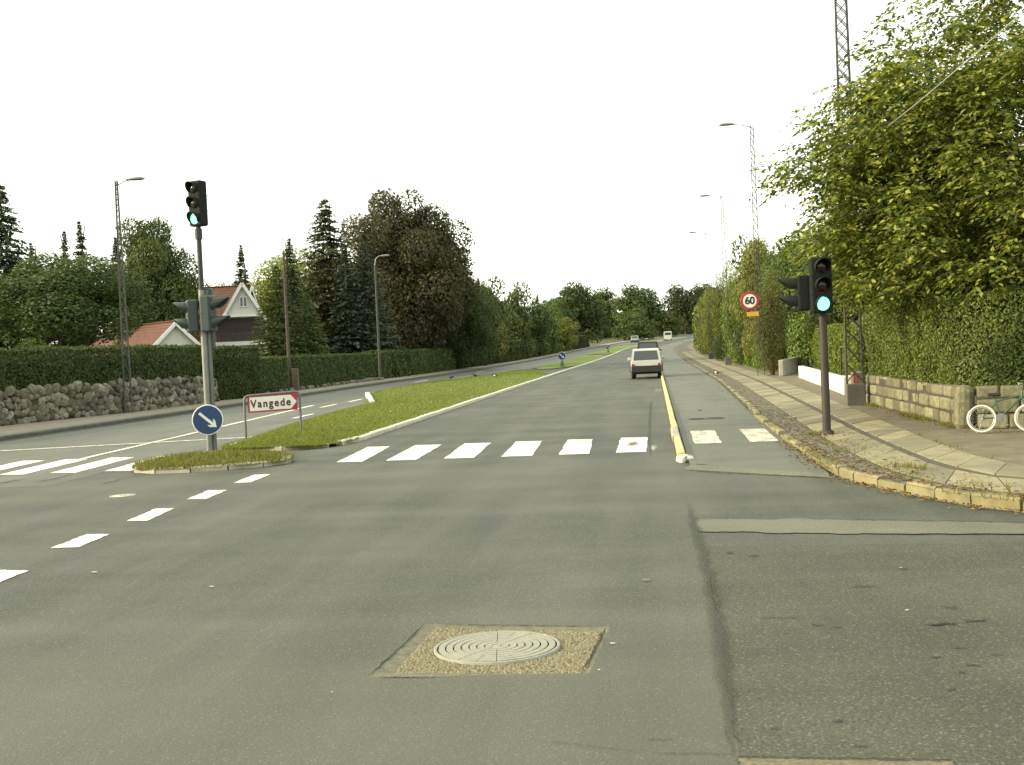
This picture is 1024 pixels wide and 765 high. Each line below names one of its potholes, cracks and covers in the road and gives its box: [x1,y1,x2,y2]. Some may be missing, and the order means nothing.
manhole cover [434,631,561,665]
